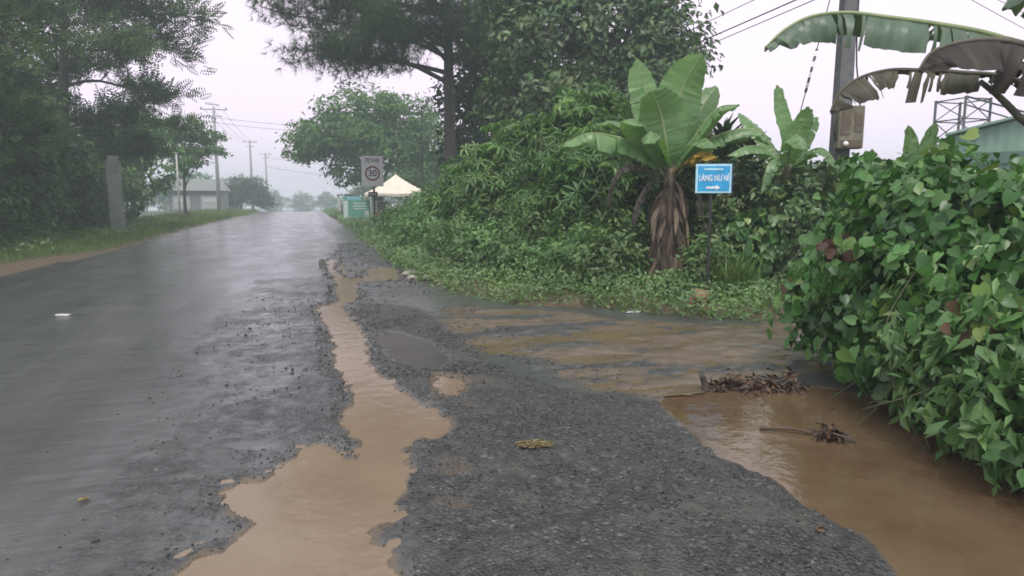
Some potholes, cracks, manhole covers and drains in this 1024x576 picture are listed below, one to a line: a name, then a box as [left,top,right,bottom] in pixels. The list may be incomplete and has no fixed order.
pothole [151,258,467,576]
